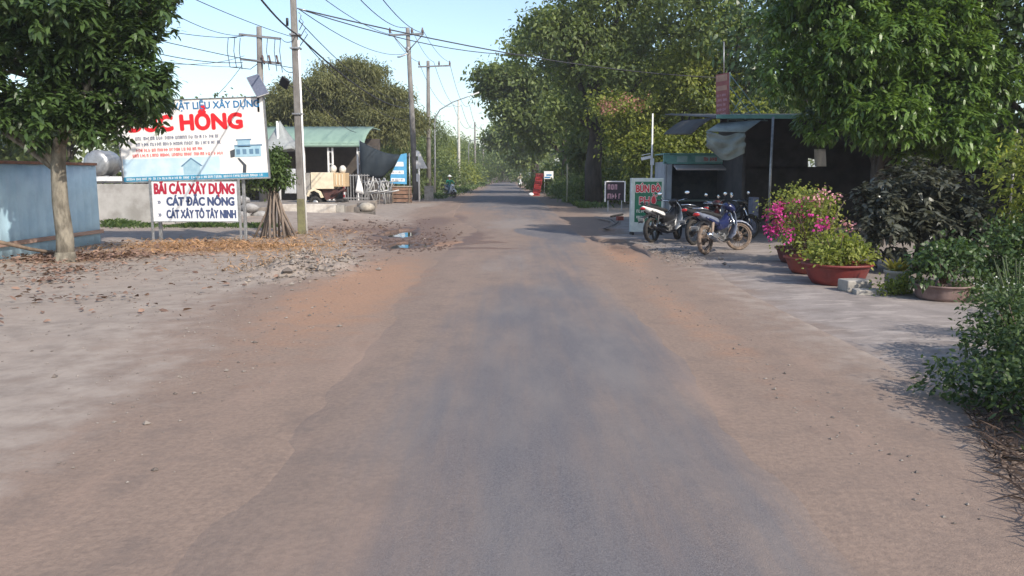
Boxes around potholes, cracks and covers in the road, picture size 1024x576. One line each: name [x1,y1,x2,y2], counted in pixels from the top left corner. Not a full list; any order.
pothole [381,241,425,250]
pothole [373,227,421,239]
